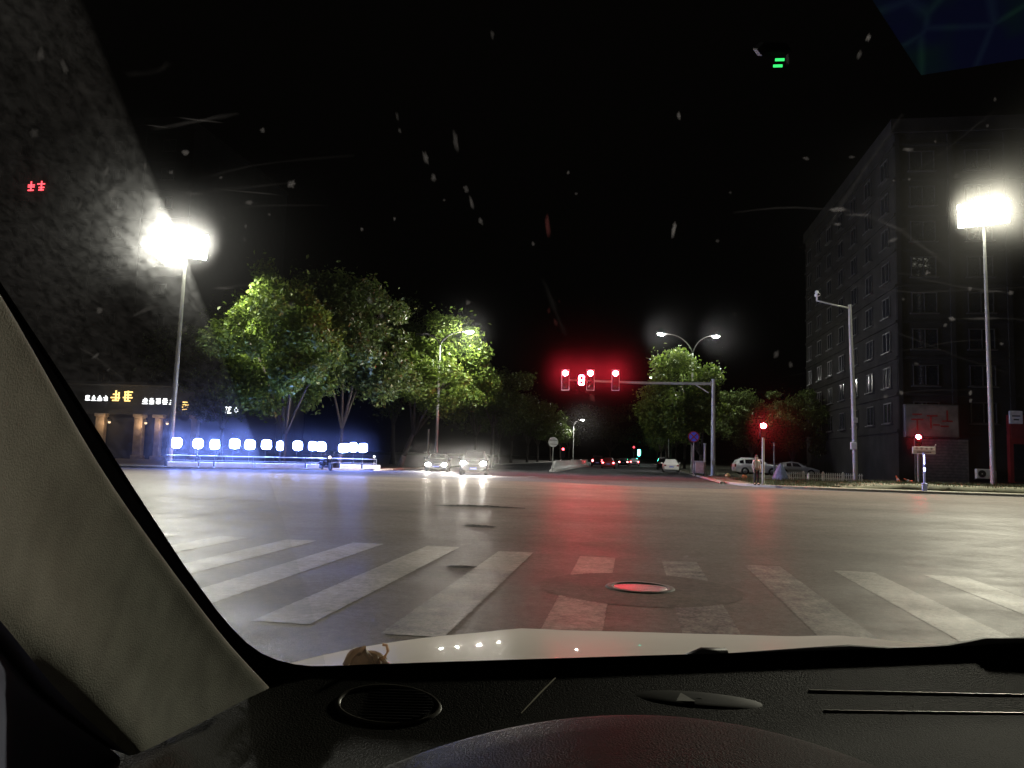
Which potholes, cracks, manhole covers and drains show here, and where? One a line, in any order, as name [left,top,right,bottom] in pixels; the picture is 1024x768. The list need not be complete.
manhole cover [540,573,744,608]
